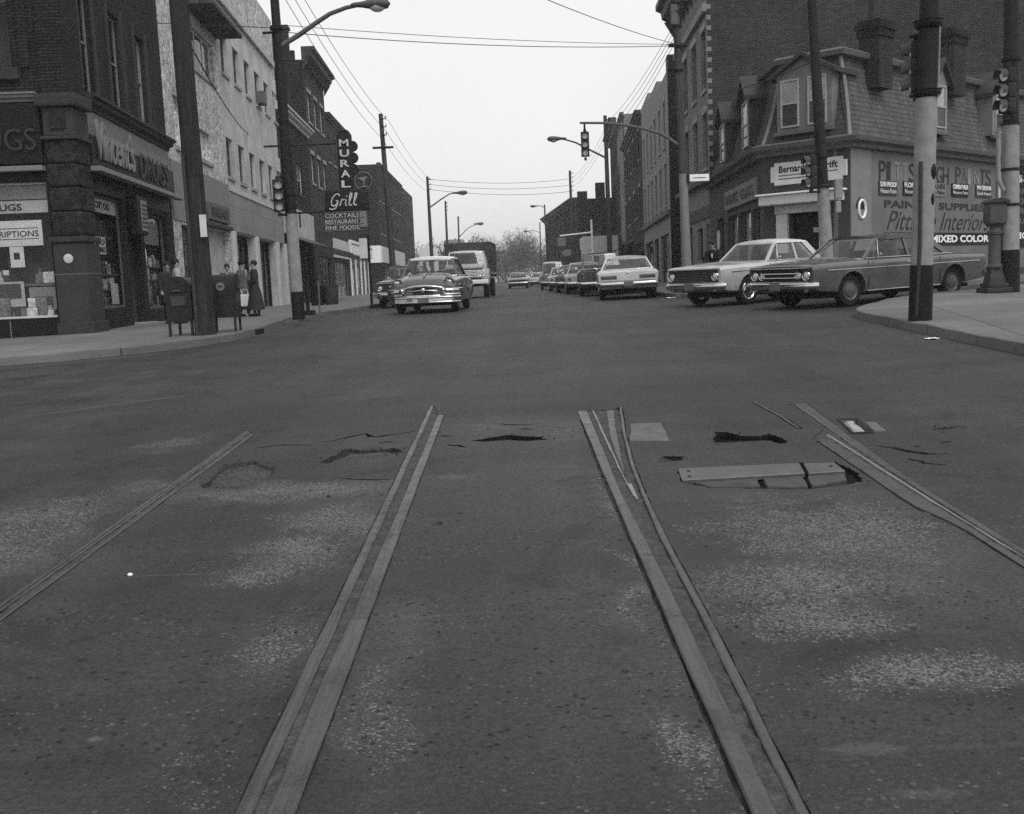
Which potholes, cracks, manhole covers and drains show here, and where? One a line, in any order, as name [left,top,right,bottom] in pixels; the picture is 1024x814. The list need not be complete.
pothole [708,431,791,446]
pothole [320,447,405,467]
crack [876,441,951,465]
utility cover [865,422,886,431]
crack [325,431,413,443]
manhole cover [837,418,874,434]
pothole [472,433,555,442]
